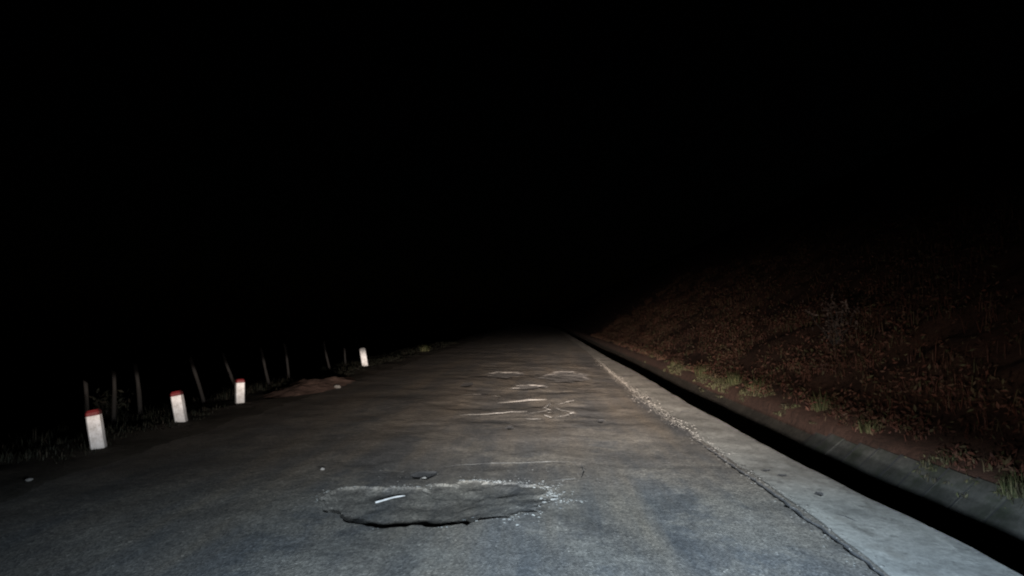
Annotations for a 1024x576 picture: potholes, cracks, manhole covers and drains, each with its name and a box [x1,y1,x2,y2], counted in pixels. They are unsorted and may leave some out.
crack [446,461,584,481]
pothole [320,480,556,528]
